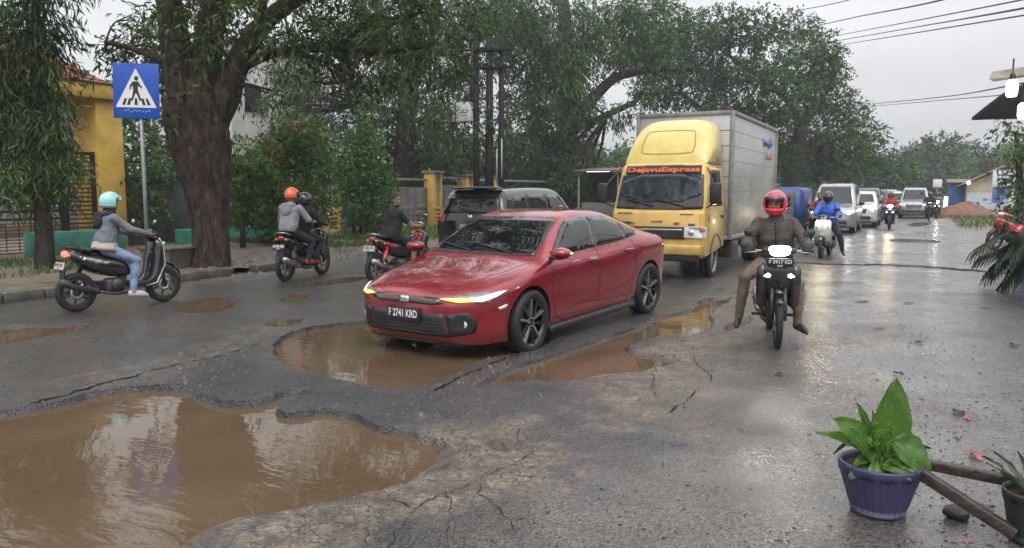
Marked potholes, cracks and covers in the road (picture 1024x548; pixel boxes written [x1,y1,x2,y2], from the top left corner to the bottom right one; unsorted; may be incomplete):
pothole [275,292,313,302]
pothole [0,384,460,548]
pothole [0,321,103,345]
pothole [170,297,238,313]
pothole [475,296,733,388]
crack [386,426,544,548]
crack [652,355,712,413]
crack [24,343,257,405]
pothole [272,320,551,388]
pothole [265,316,305,327]
